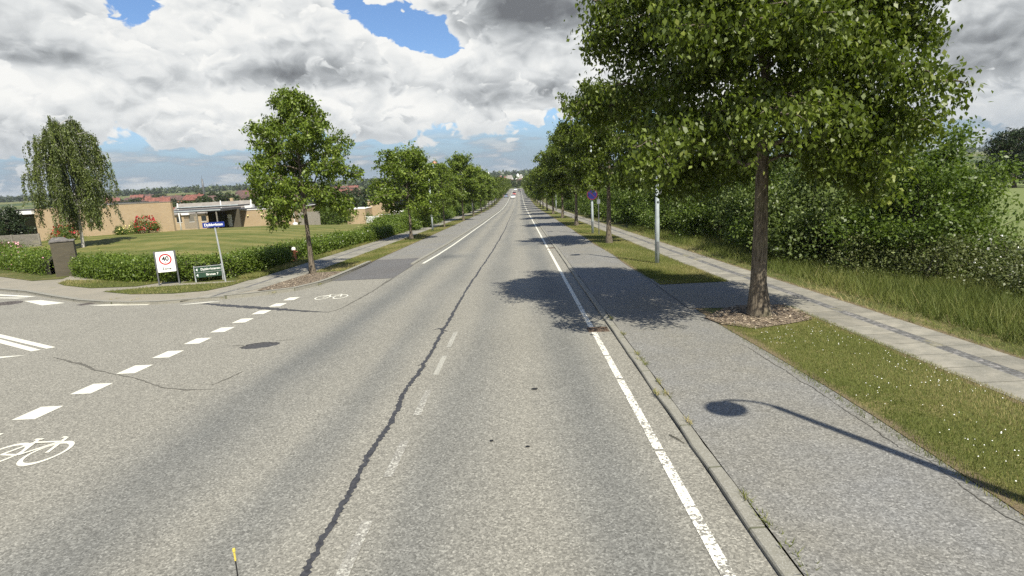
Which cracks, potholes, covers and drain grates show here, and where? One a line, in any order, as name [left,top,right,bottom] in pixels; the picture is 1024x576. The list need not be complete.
crack [330,265,413,312]
crack [54,357,241,390]
